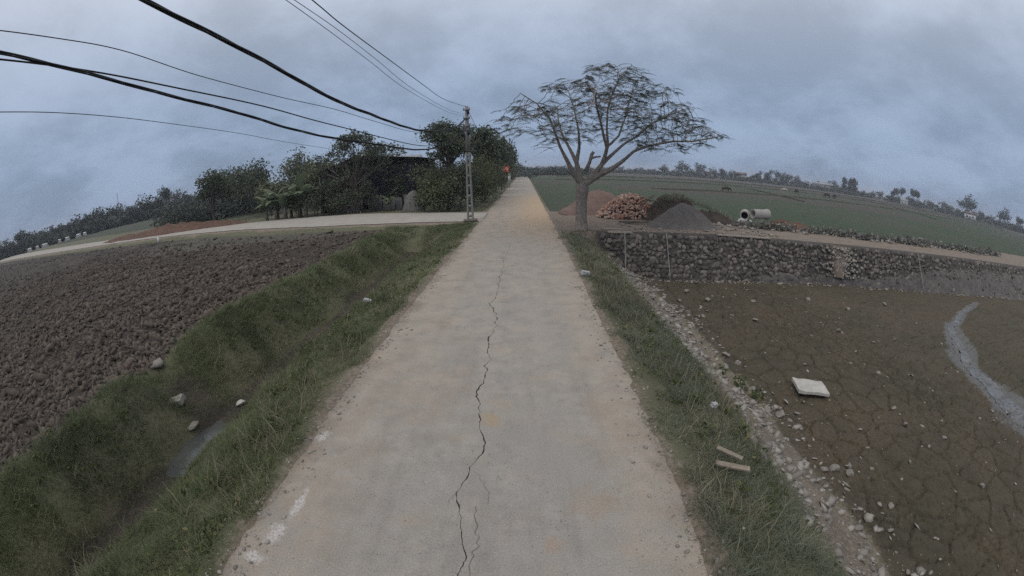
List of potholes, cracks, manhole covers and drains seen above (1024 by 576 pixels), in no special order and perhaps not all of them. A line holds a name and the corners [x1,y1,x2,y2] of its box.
crack [448,244,510,576]
